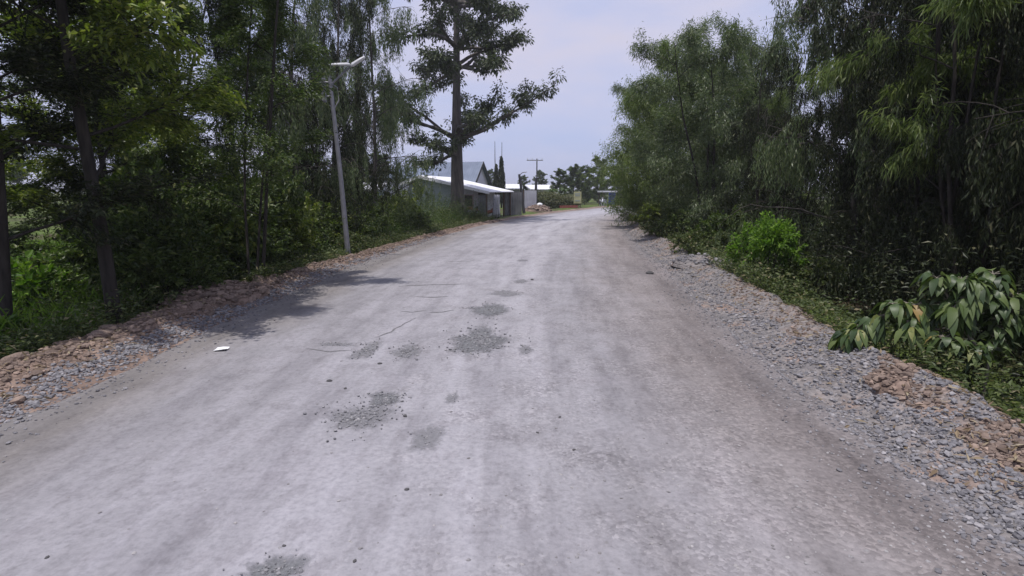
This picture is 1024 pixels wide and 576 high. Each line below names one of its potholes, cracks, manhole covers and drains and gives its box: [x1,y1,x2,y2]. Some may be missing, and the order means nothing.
pothole [303,393,412,442]
pothole [438,318,530,360]
pothole [468,300,521,321]
pothole [360,389,407,407]
pothole [389,340,430,362]
pothole [408,428,442,449]
pothole [223,549,306,576]
pothole [351,334,380,359]
crack [380,284,452,336]
